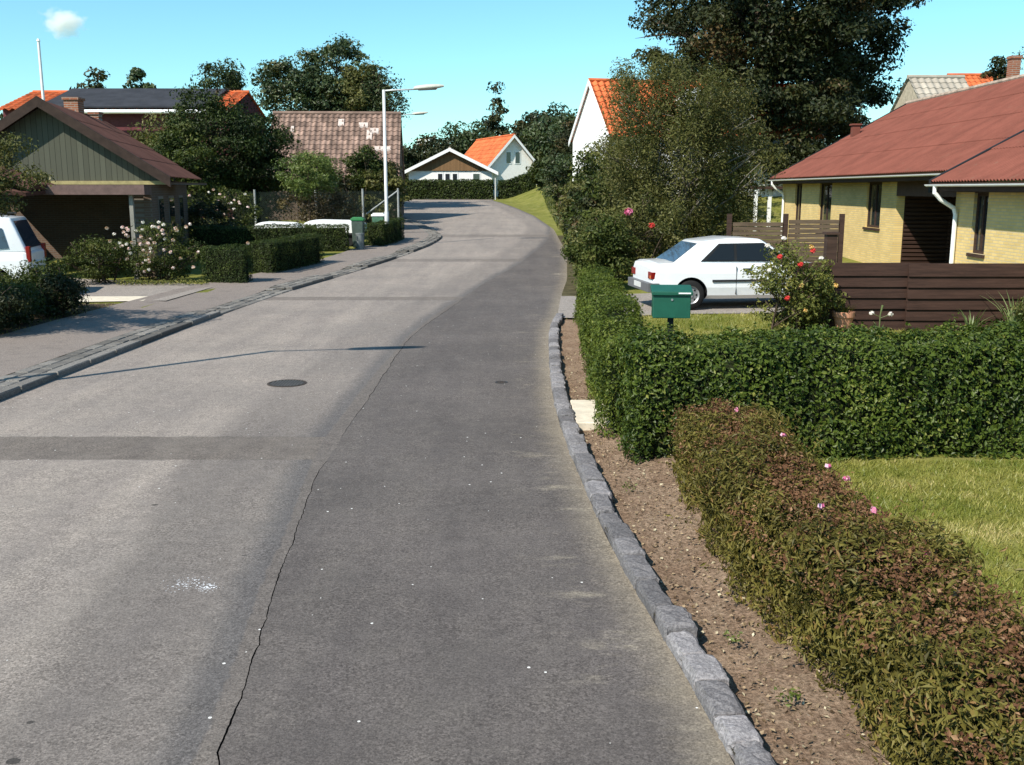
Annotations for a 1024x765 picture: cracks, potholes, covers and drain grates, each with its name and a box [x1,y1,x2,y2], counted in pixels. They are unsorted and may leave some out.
manhole cover [267,379,307,387]
crack [216,462,326,765]
crack [341,300,462,437]
